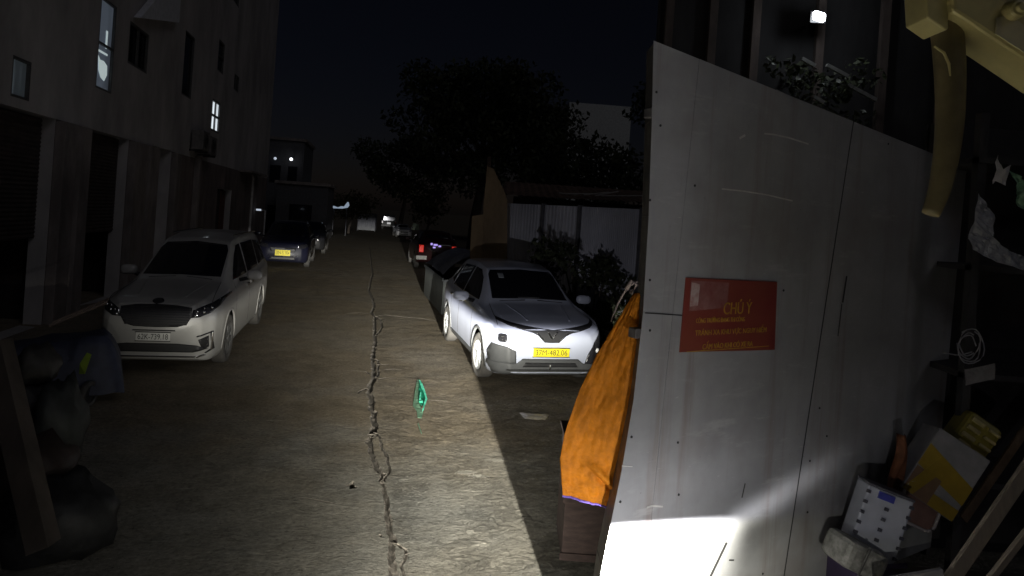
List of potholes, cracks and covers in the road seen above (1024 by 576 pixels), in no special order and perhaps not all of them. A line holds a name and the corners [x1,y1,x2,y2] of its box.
crack [341,247,435,576]
